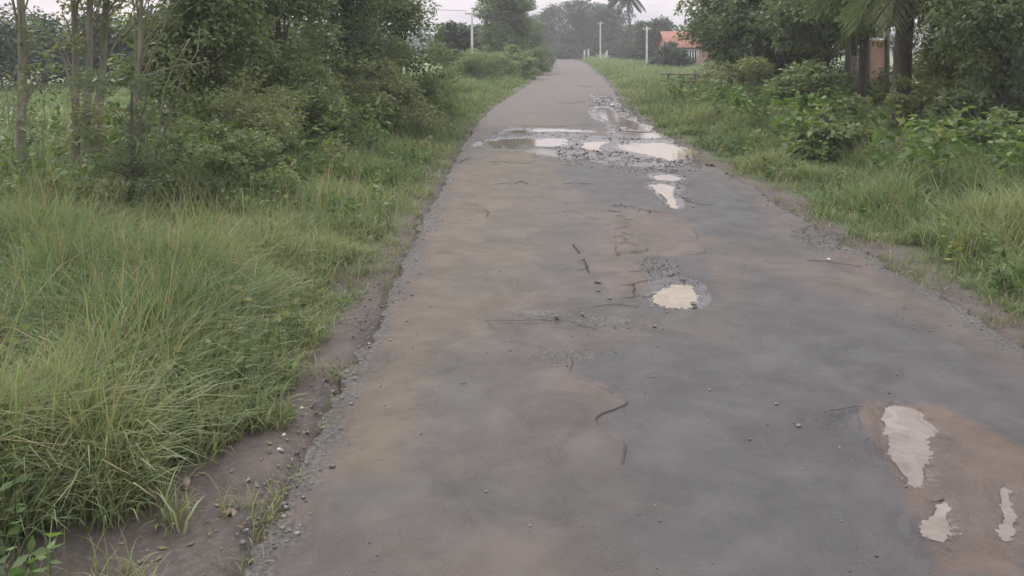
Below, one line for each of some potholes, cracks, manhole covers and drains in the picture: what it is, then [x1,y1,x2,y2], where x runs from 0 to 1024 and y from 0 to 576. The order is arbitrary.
pothole [585,106,655,132]
pothole [858,394,956,501]
pothole [601,129,670,140]
pothole [642,172,691,182]
pothole [568,139,621,152]
pothole [472,137,584,148]
pothole [632,256,693,283]
pothole [640,180,690,210]
pothole [637,277,715,312]
pothole [584,97,626,108]
crack [487,191,713,329]
pothole [896,492,970,551]
